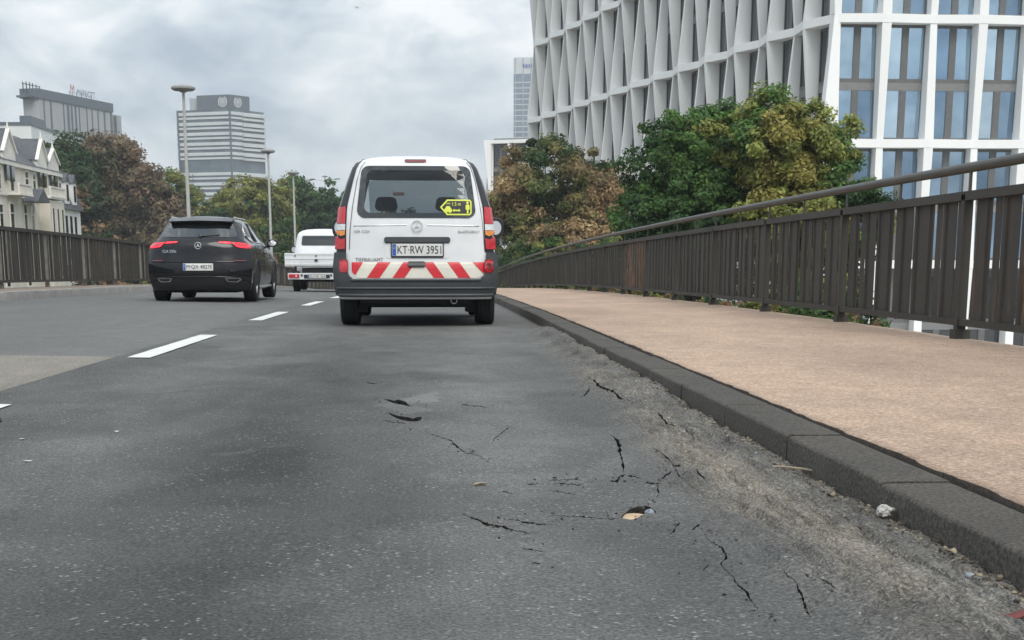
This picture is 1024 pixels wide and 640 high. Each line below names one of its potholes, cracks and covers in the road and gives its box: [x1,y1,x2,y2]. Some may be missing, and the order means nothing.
pothole [621,506,656,518]
crack [466,514,618,564]
crack [502,479,581,494]
crack [609,435,705,497]
crack [426,427,509,459]
crack [583,376,625,401]
crack [783,570,836,617]
crack [668,523,774,619]
